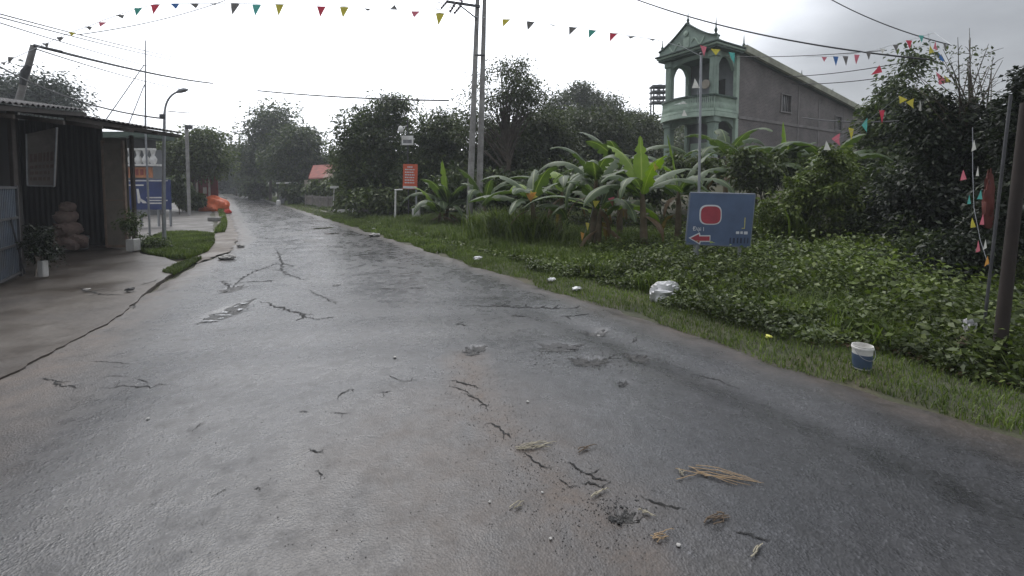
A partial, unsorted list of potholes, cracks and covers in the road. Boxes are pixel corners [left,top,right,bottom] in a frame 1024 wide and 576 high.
crack [457,304,585,326]
crack [38,378,76,388]
pothole [564,356,612,367]
pothole [462,345,488,356]
crack [219,264,336,320]
crack [447,380,611,489]
pothole [196,298,256,324]
crack [635,494,687,523]
